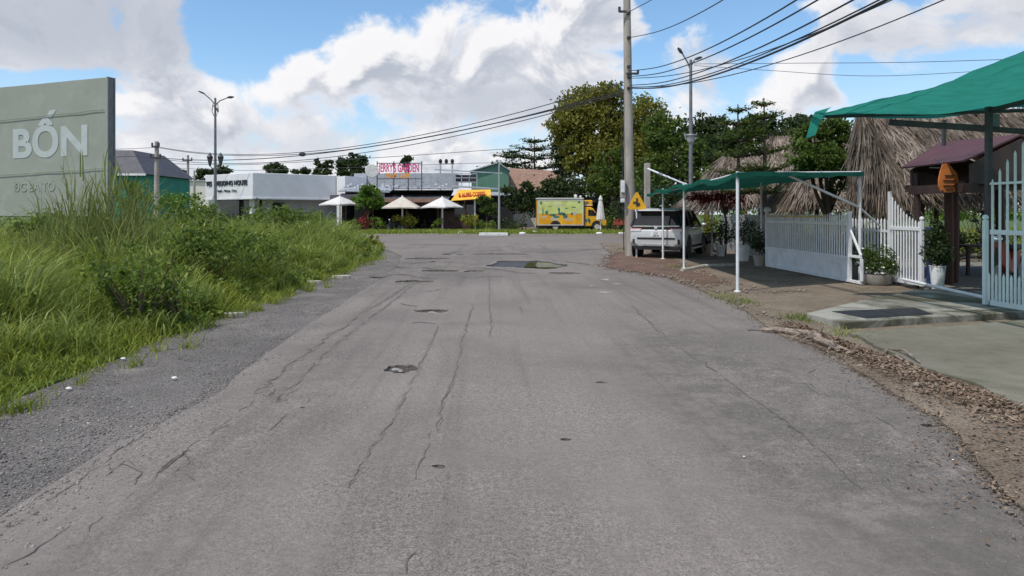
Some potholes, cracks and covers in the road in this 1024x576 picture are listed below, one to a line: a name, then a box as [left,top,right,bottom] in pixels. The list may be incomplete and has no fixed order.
crack [4,250,537,565]
pothole [382,364,424,375]
pothole [479,260,578,270]
